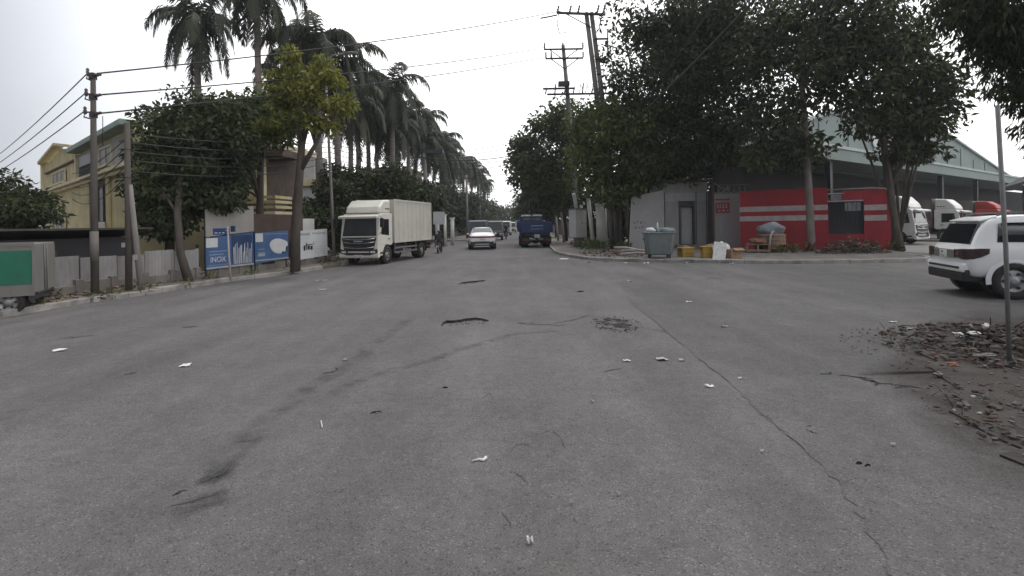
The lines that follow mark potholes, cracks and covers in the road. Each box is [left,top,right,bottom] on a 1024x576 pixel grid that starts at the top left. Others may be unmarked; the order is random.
pothole [590,316,643,333]
crack [509,423,577,453]
pothole [441,318,489,327]
crack [820,372,926,389]
